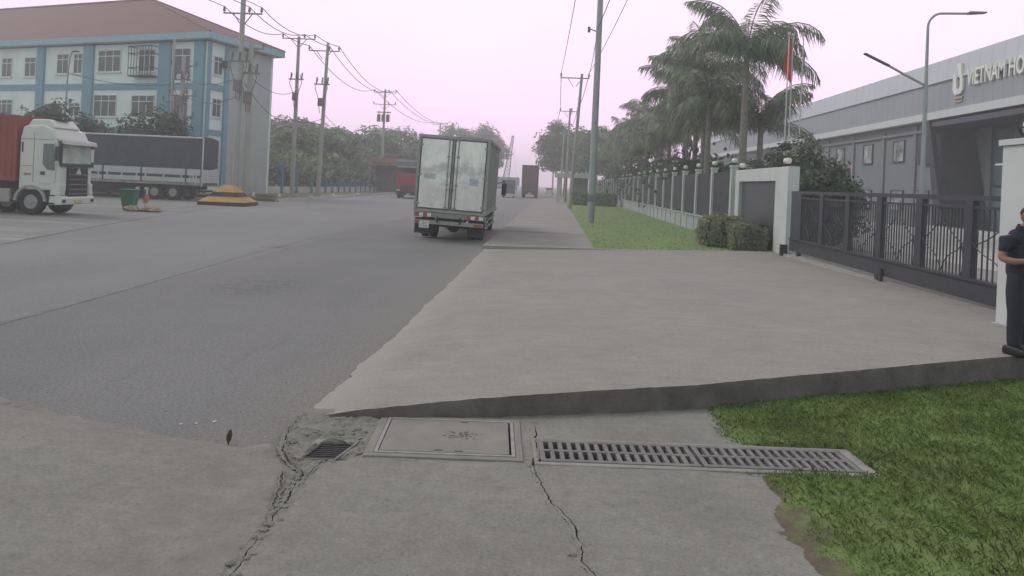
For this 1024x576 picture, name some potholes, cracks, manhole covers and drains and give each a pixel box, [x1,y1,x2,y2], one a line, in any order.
manhole cover [362,417,523,463]
crack [528,423,600,576]
drain grate [293,438,360,461]
drain grate [690,445,865,473]
drain grate [538,439,702,467]
